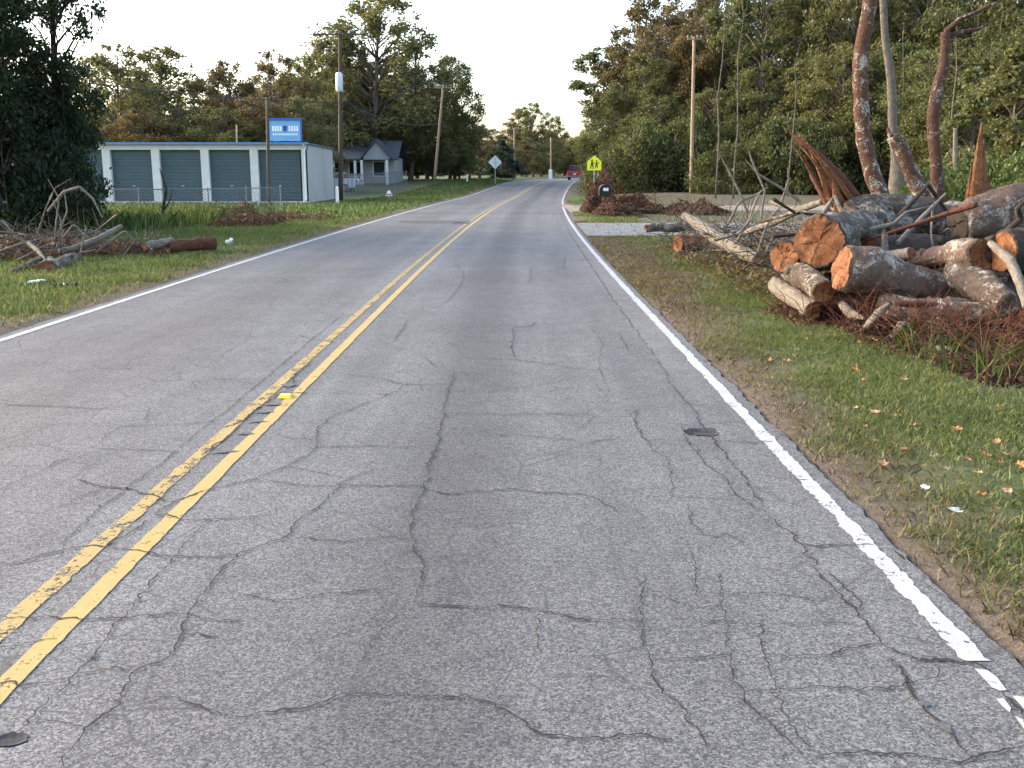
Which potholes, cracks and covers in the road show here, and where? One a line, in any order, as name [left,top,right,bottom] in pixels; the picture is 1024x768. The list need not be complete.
pothole [0,731,28,746]
pothole [684,427,718,437]
crack [0,321,1020,768]
